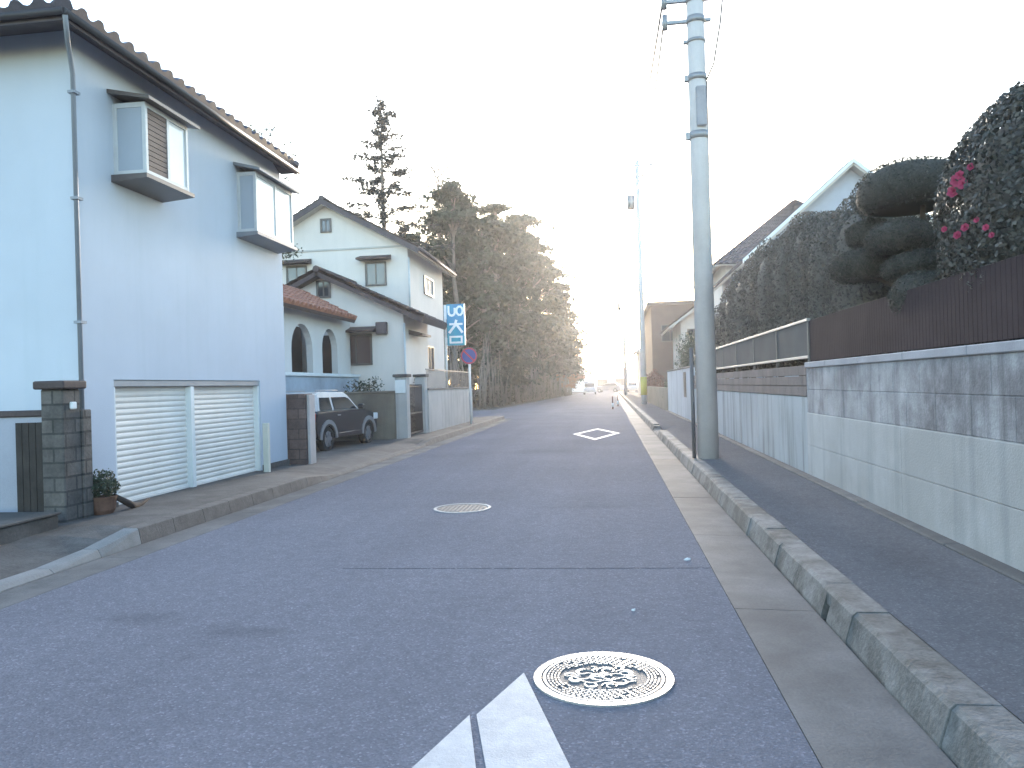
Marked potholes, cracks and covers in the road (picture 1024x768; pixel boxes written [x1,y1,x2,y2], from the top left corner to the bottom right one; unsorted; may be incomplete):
manhole cover [434,503,491,513]
manhole cover [534,652,674,707]
